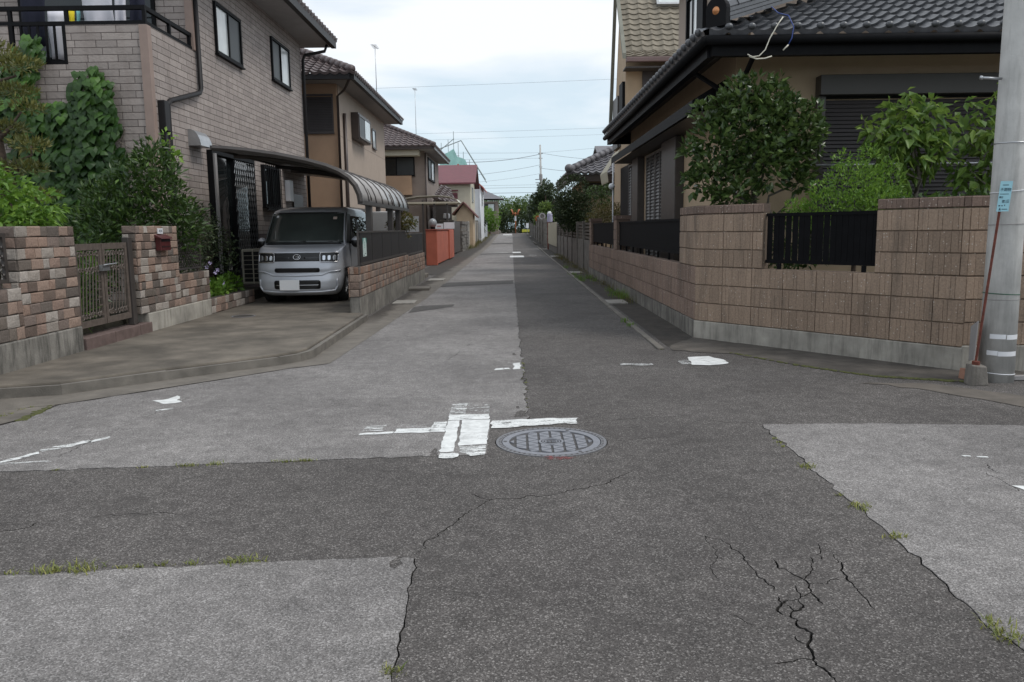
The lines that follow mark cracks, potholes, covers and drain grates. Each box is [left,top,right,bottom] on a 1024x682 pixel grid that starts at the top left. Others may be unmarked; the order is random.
crack [416,473,627,554]
crack [704,535,874,682]
manhole cover [496,427,607,457]
